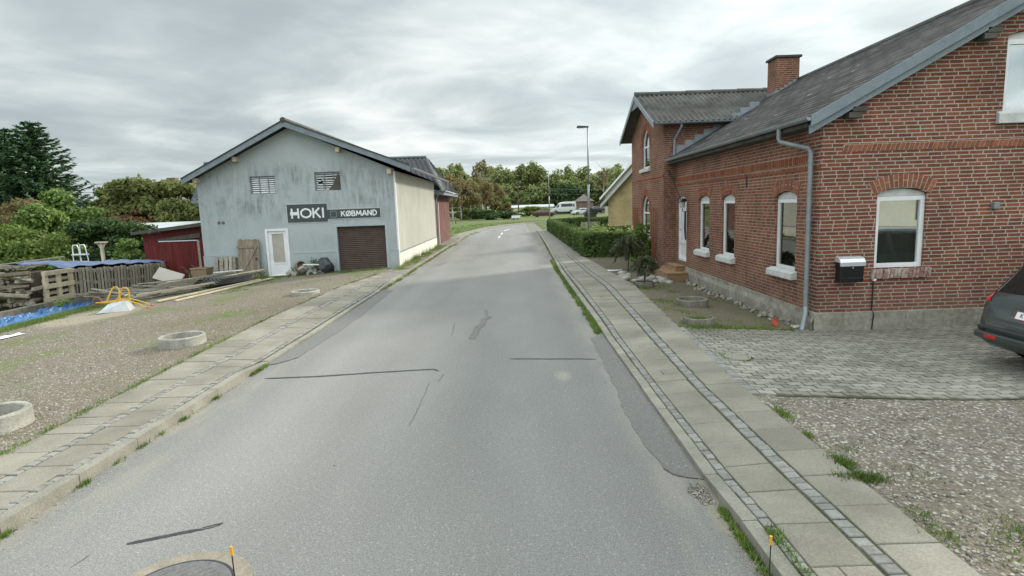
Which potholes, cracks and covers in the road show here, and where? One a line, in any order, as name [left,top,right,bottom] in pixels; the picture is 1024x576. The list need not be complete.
pothole [686,482,713,506]
manhole cover [130,551,253,576]
